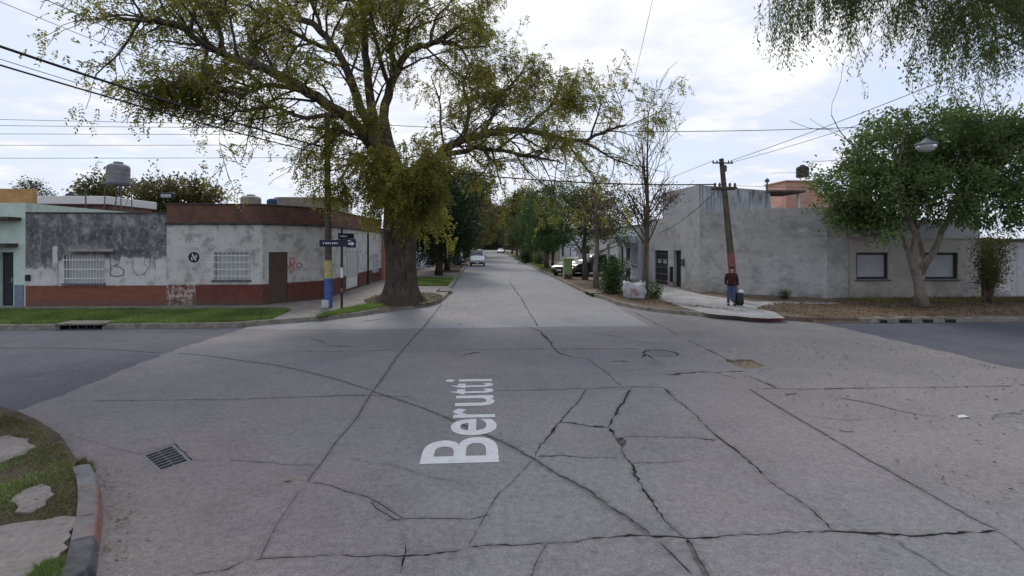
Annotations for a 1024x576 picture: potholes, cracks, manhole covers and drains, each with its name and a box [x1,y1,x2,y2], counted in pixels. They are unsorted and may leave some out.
drain grate [54,320,118,329]
crack [113,286,1024,576]
pothole [726,359,764,369]
drain grate [141,444,191,472]
